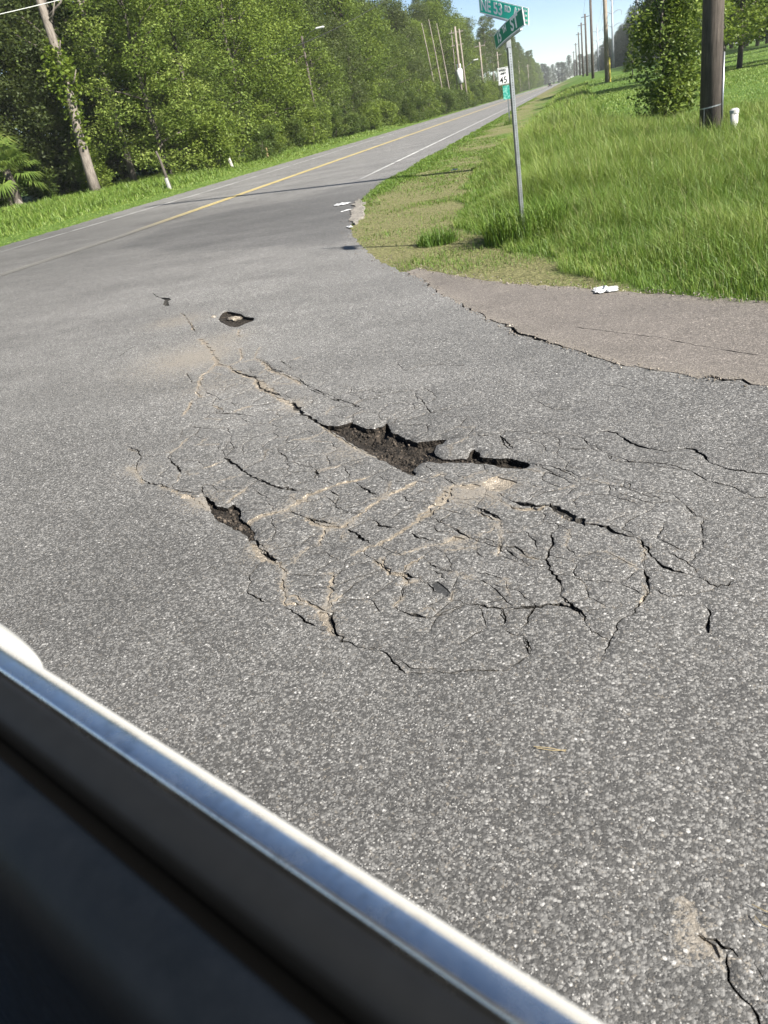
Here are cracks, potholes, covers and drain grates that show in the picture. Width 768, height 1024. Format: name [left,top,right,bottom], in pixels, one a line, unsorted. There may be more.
crack [585,431,768,475]
pothole [218,311,254,327]
pothole [205,497,255,542]
crack [656,890,765,1024]
crack [578,327,763,357]
pothole [315,422,530,476]
